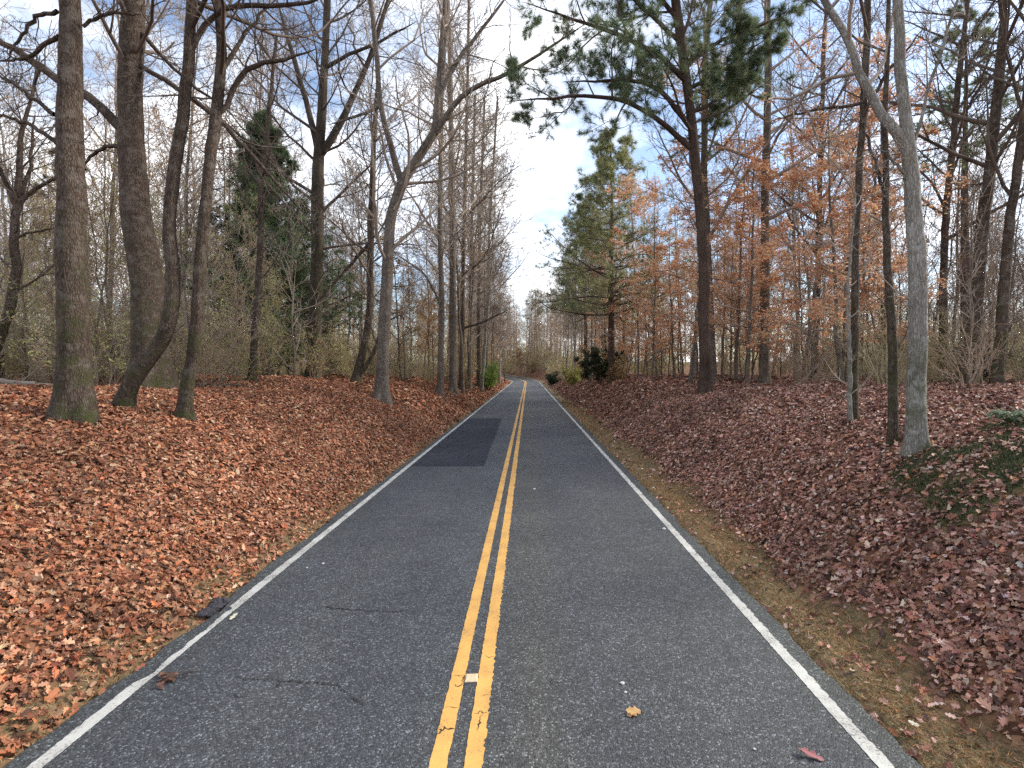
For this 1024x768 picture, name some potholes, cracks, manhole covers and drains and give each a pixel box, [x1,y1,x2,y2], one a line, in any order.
crack [234,676,365,705]
